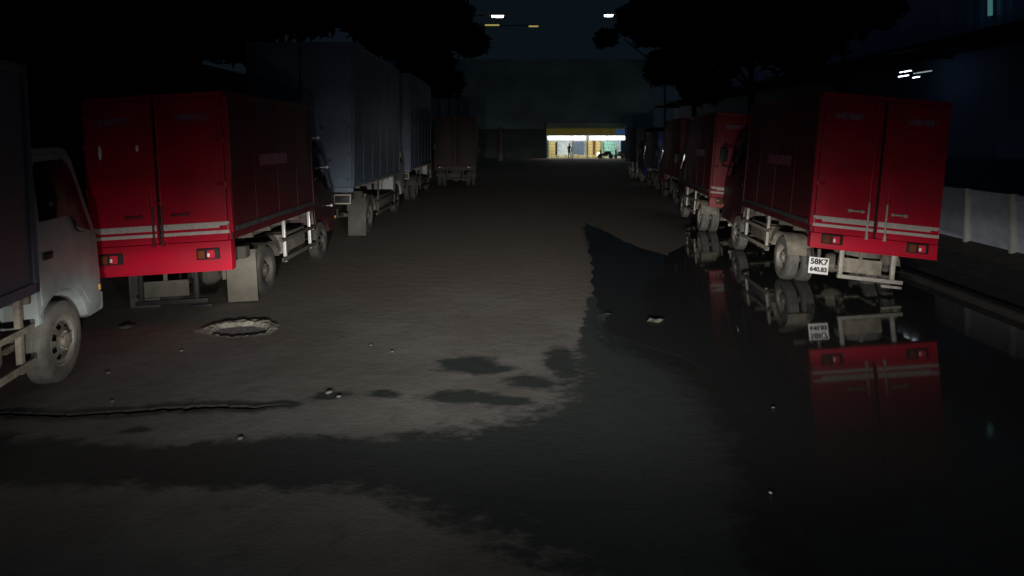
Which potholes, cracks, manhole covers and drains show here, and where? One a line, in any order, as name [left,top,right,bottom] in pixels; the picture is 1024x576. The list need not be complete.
crack [0,404,292,418]
pothole [193,319,280,338]
